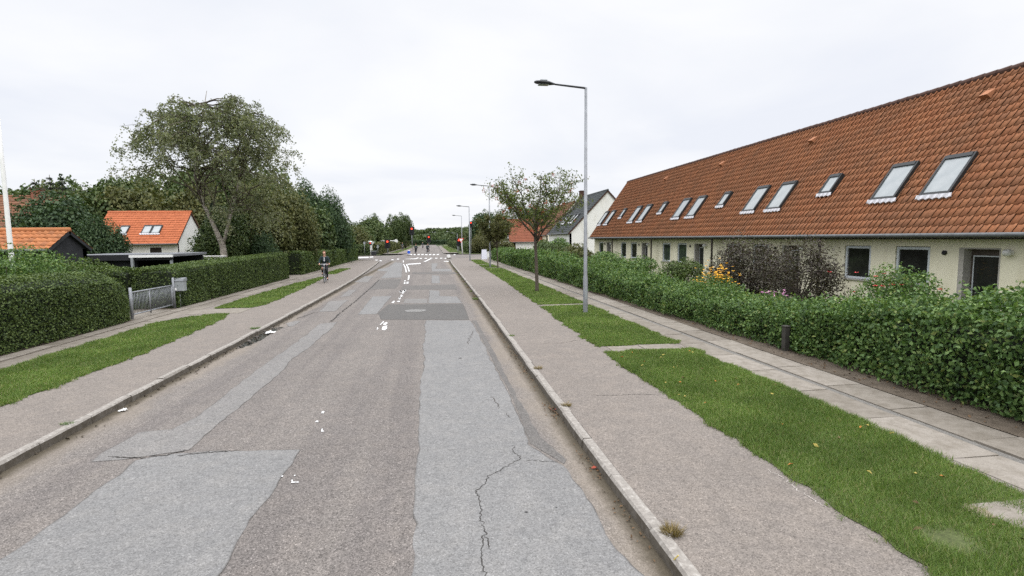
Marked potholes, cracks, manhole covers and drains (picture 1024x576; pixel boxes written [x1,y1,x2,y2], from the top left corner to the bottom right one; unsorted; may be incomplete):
crack [108,450,236,458]
crack [475,446,560,575]
